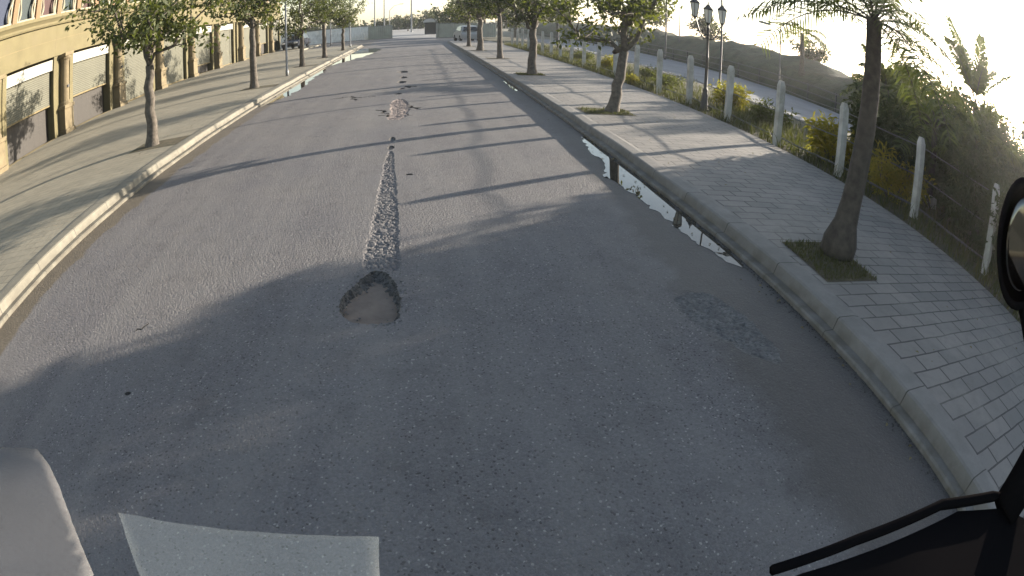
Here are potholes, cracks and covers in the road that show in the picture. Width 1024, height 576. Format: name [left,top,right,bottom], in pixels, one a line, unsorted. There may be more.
pothole [332,268,416,332]
